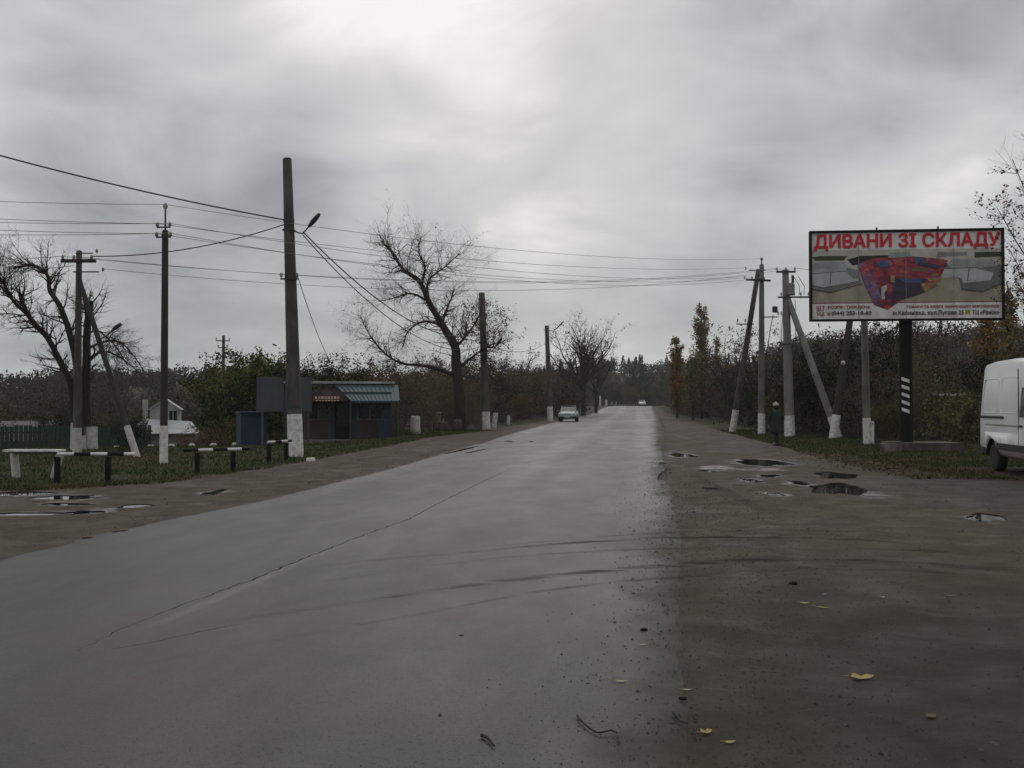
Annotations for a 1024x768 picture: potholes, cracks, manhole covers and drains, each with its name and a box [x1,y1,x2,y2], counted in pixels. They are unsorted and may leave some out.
pothole [809,482,868,496]
pothole [736,459,796,467]
pothole [966,513,1006,522]
